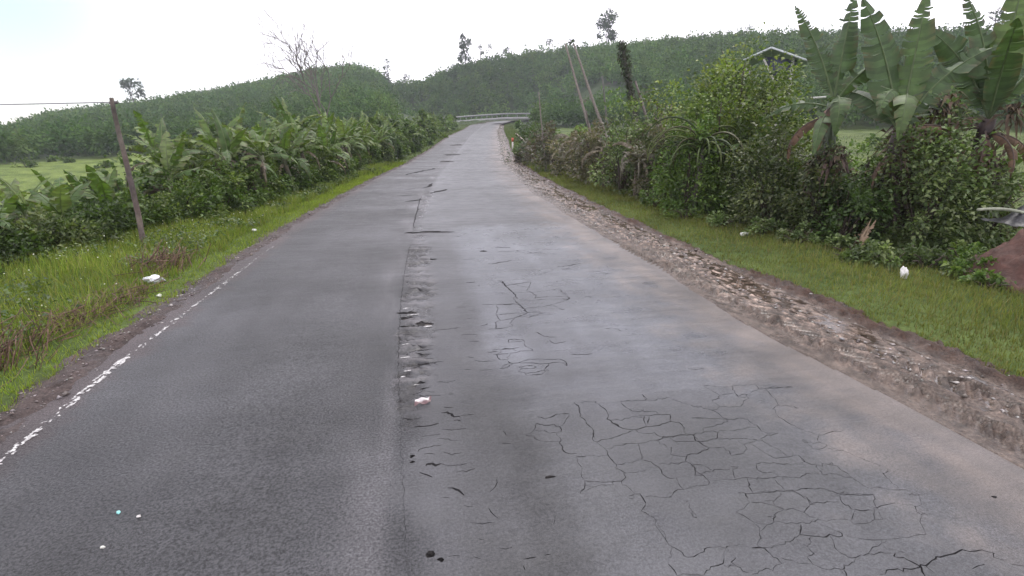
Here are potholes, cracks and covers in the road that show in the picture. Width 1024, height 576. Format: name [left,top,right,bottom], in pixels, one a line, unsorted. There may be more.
crack [404,236,928,576]
crack [405,168,446,196]
crack [880,549,1021,576]
